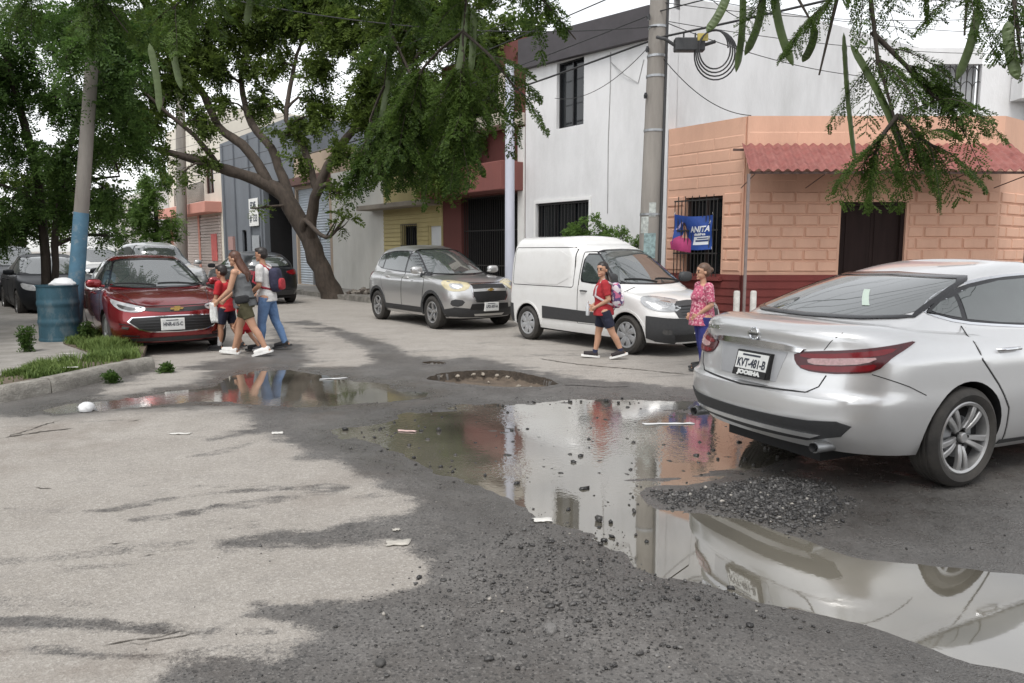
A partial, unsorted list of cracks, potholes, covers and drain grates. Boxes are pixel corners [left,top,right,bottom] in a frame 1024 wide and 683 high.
crack [101,631,195,646]
pothole [421,370,564,389]
crack [4,421,70,438]
